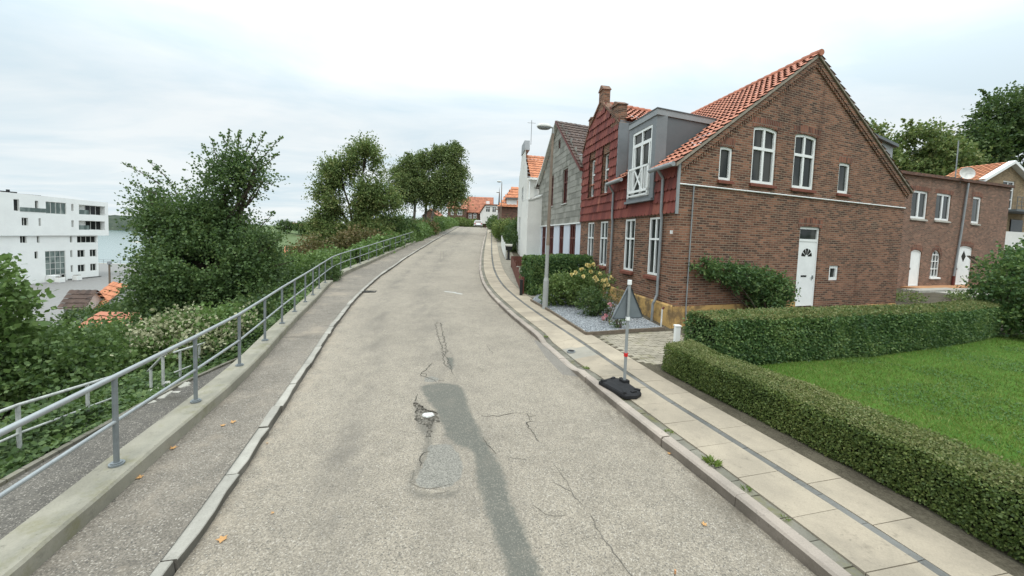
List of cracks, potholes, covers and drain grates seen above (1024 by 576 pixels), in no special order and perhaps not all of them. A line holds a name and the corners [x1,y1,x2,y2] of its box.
crack [533,463,632,576]
crack [415,322,452,401]
pothole [413,403,440,438]
